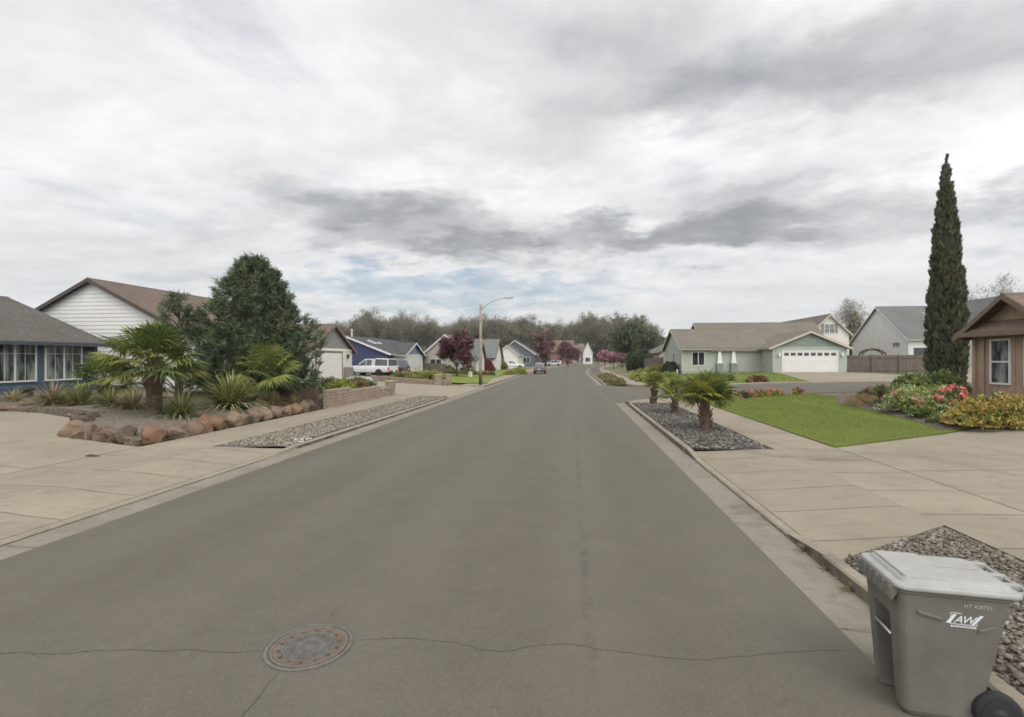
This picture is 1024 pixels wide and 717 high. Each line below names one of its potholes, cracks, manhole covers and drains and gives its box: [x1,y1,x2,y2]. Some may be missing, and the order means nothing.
manhole cover [263,624,353,672]
crack [360,638,832,660]
crack [13,646,281,717]
